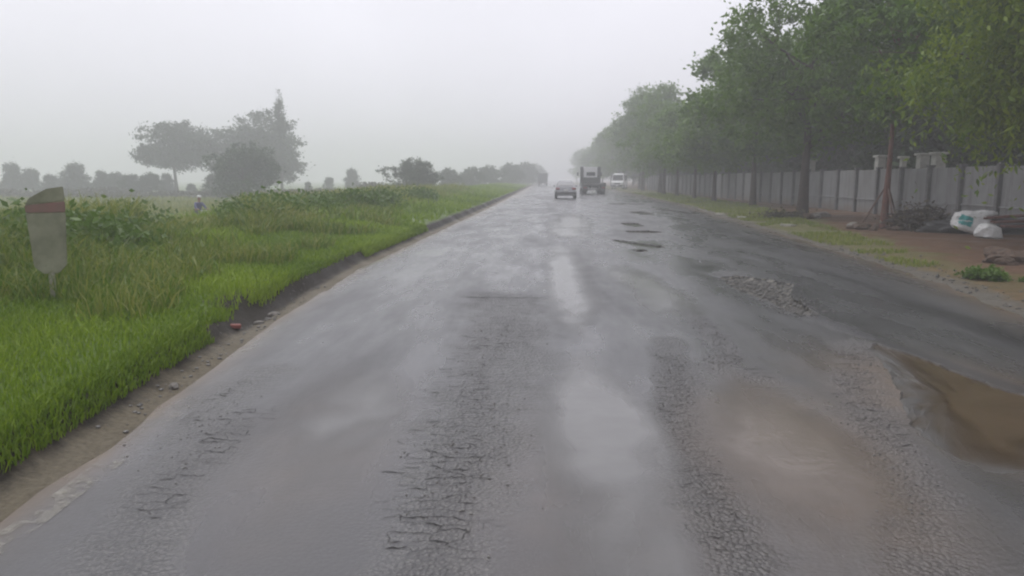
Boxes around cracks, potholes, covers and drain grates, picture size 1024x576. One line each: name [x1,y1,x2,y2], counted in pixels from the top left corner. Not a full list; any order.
crack [831,351,918,446]
crack [374,293,538,559]
pothole [721,275,813,315]
crack [697,317,773,378]
pothole [611,239,666,248]
crack [123,383,275,518]
crack [654,354,773,550]
pothole [867,343,1024,474]
